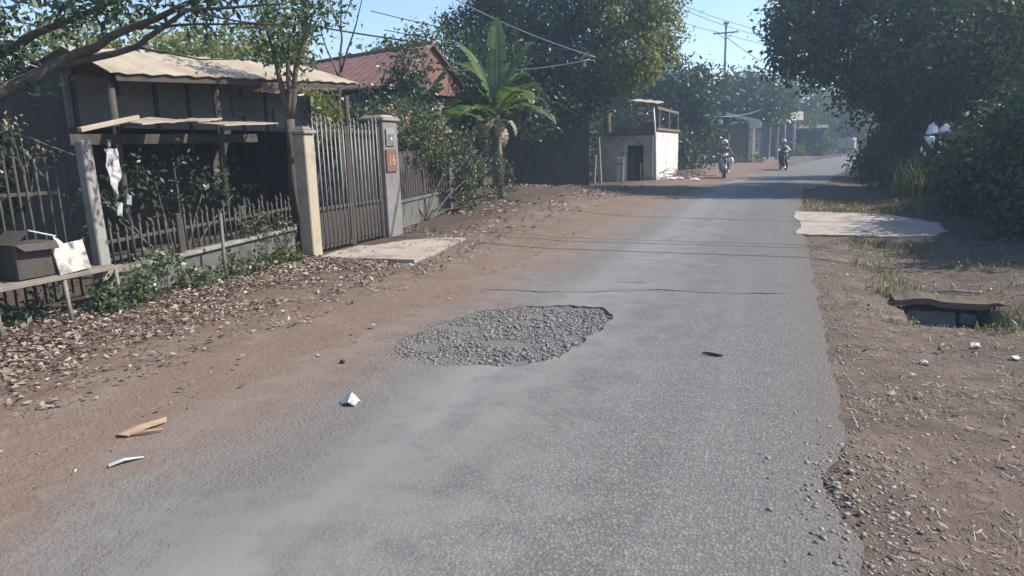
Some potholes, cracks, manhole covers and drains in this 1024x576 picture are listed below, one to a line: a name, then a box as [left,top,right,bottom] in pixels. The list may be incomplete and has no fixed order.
pothole [358,303,613,367]
crack [486,282,779,294]
